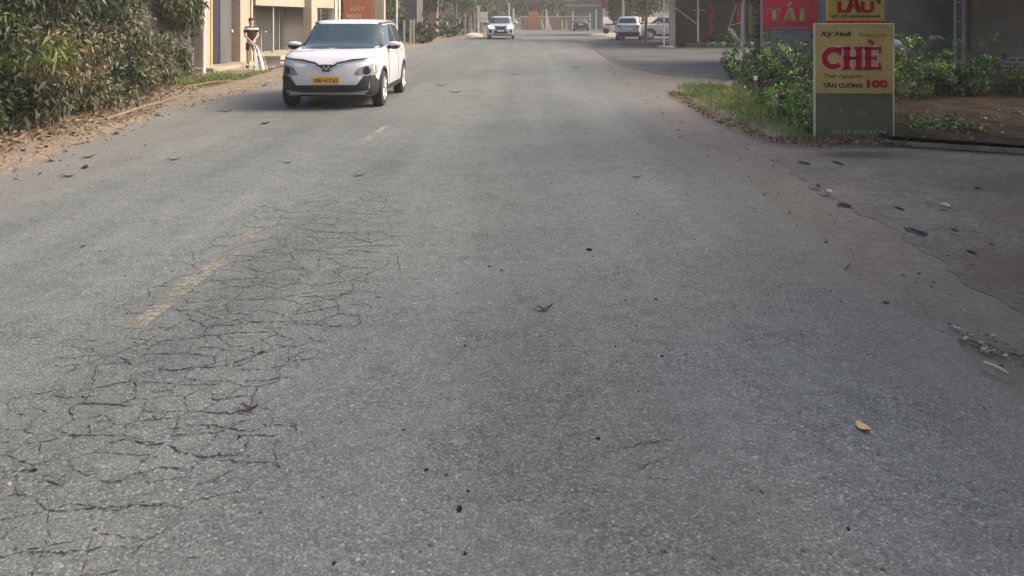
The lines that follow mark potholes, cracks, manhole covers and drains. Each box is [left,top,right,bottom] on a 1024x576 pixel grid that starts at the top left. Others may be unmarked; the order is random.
crack [0,190,407,576]
crack [603,428,681,480]
pothole [903,227,928,237]
